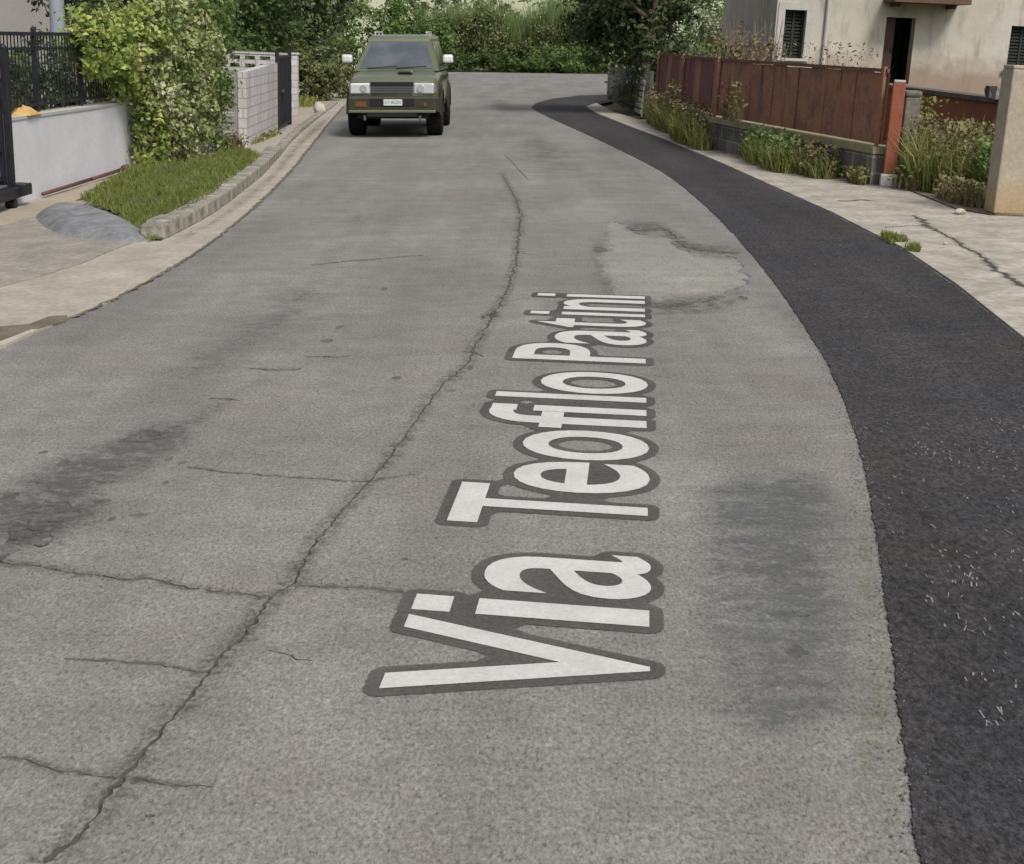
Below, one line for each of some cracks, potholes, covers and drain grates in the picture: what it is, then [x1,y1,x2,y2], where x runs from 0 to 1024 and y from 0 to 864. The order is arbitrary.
crack [0,156,535,864]
crack [912,215,1024,287]
